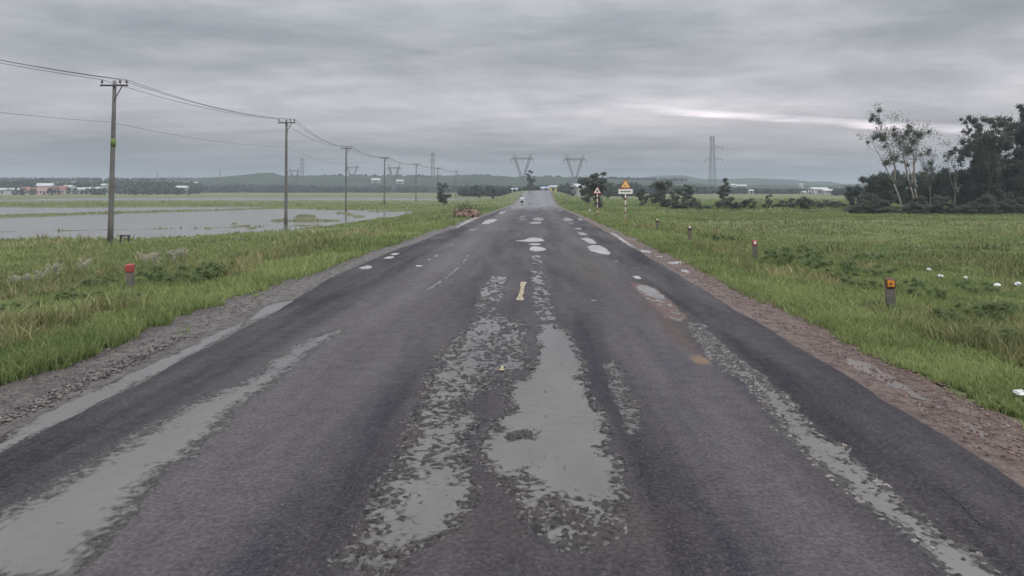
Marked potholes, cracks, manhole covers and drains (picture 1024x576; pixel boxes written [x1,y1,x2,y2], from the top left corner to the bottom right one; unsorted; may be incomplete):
pothole [475,322,634,555]
pothole [630,282,687,321]
pothole [686,323,1004,576]
pothole [602,360,643,435]
pothole [326,313,535,576]
pothole [473,275,510,313]
crack [939,487,987,528]
